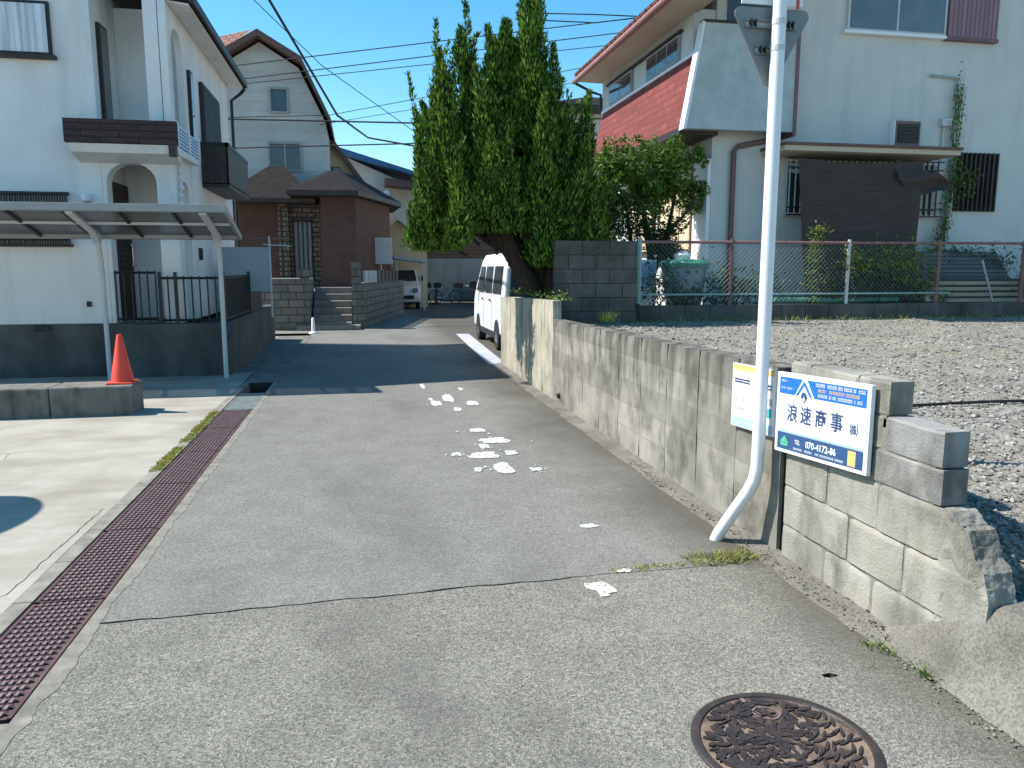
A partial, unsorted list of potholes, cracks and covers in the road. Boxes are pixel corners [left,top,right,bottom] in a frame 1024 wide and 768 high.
drain grate [182,427,237,453]
drain grate [105,483,195,532]
manhole cover [690,692,886,768]
drain grate [150,451,219,486]
drain grate [0,599,104,724]
drain grate [35,529,158,605]
drain grate [205,409,251,429]
